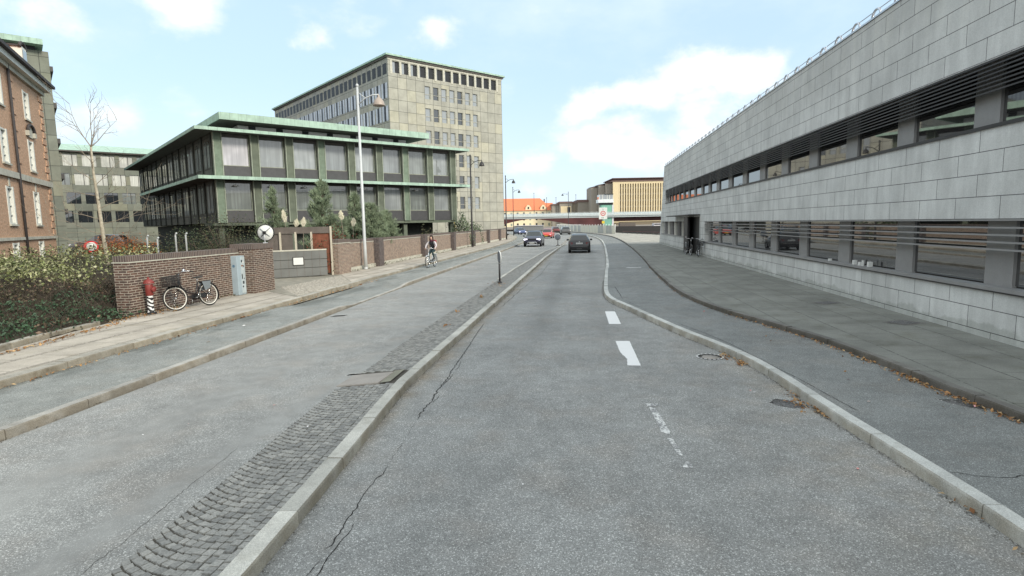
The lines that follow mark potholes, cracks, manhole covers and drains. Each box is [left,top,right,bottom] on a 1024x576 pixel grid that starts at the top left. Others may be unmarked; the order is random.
crack [306,324,484,576]
